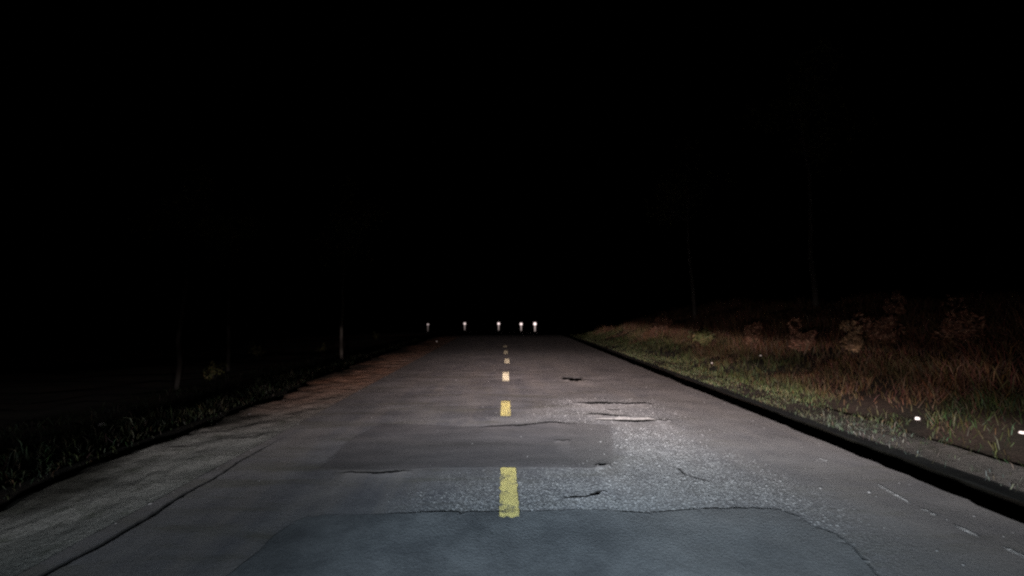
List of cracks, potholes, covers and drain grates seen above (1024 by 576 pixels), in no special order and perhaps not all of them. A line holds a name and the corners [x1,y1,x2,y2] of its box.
crack [563,490,609,499]
